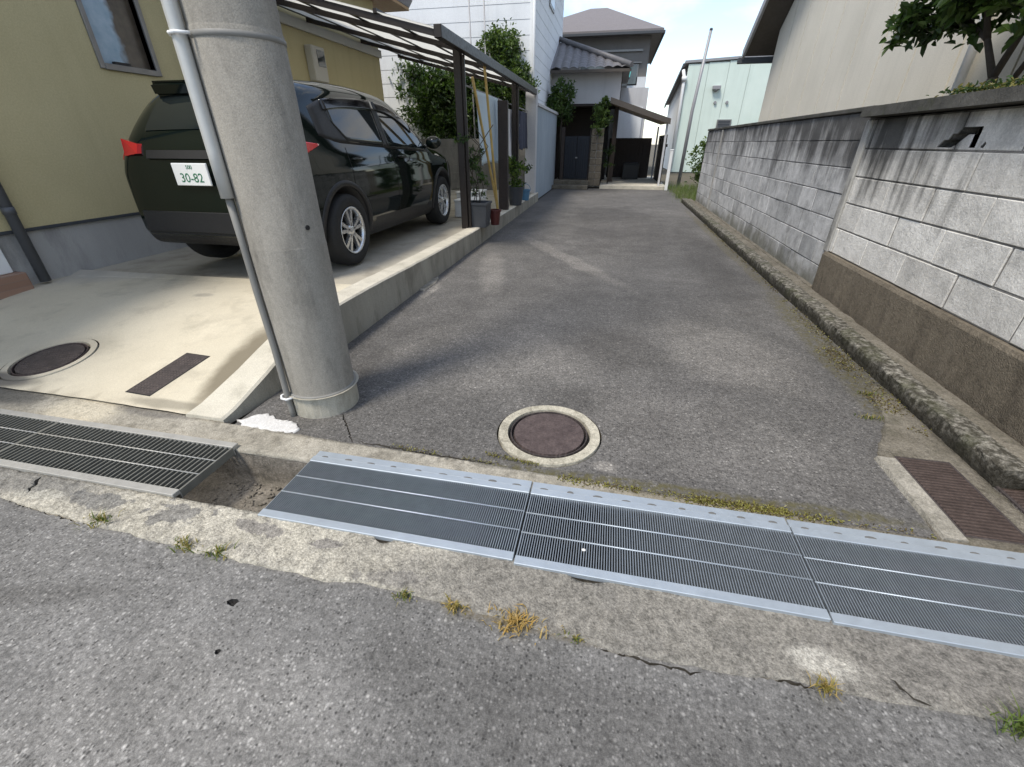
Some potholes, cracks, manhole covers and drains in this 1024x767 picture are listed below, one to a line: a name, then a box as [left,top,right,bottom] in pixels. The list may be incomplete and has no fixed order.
drain grate [0,418,239,498]
crack [777,680,815,690]
drain grate [0,409,64,451]
manhole cover [0,339,99,381]
manhole cover [498,405,600,467]
crack [601,649,702,676]
drain grate [514,482,831,622]
drain grate [786,519,1024,659]
crack [889,678,931,706]
drain grate [258,451,532,561]
